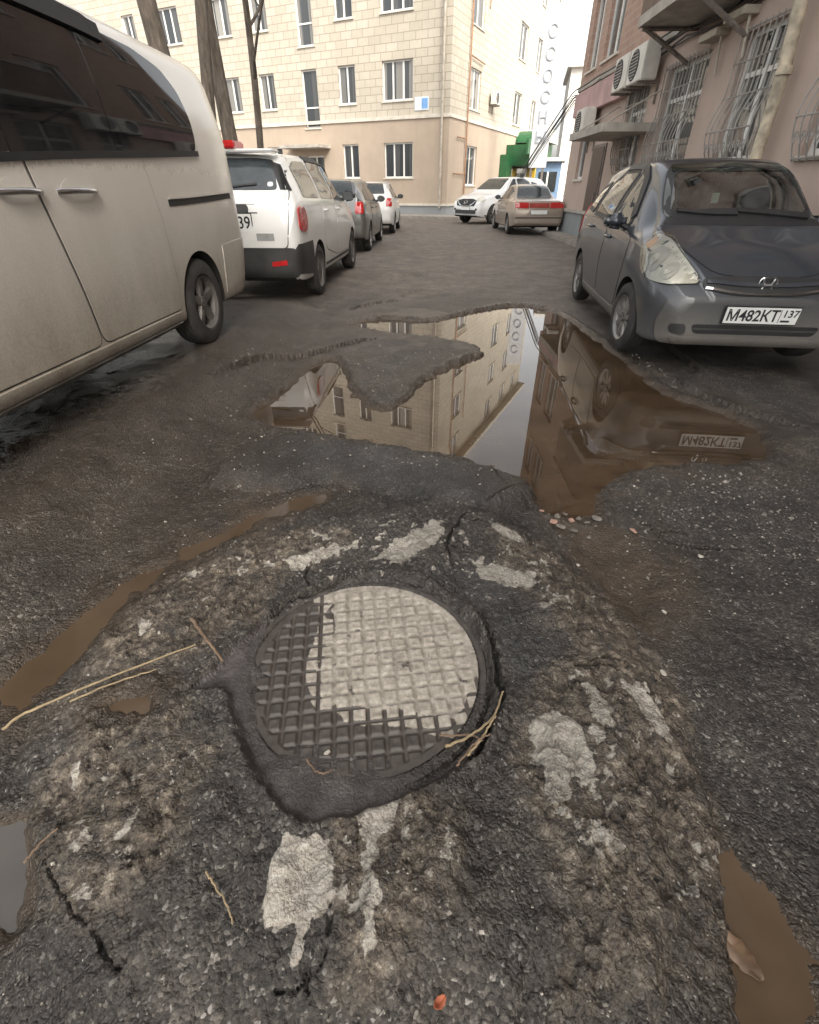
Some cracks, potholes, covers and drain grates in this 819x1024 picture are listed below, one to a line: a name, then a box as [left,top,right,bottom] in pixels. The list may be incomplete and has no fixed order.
crack [41,853,138,972]
manhole cover [249,585,487,777]
pothole [0,481,346,729]
crack [445,468,532,568]
pothole [712,840,819,1024]
pothole [241,302,791,528]
